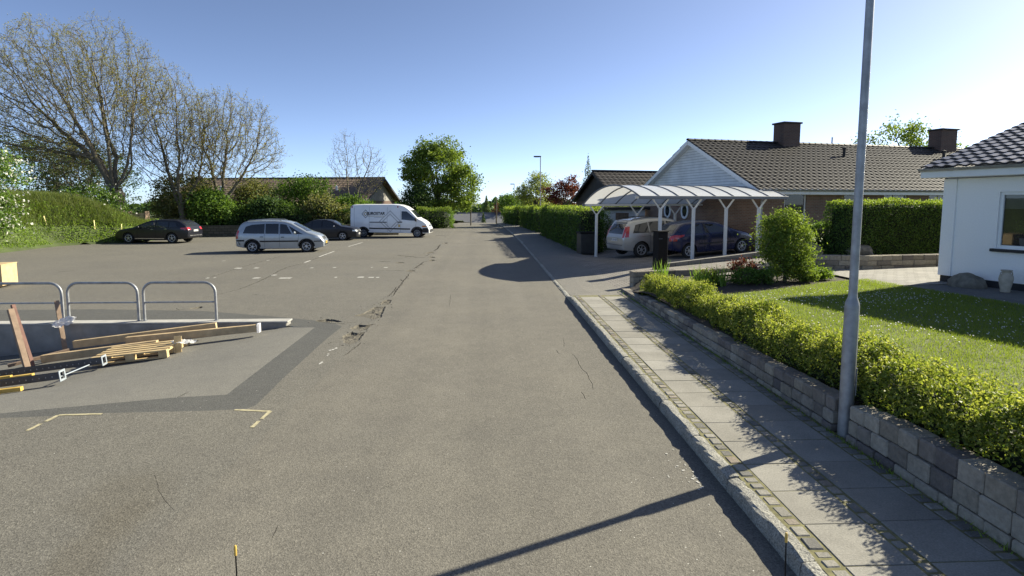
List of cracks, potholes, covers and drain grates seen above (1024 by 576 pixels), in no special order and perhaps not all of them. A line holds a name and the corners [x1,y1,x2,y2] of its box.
pothole [355,306,386,320]
pothole [342,332,365,344]
